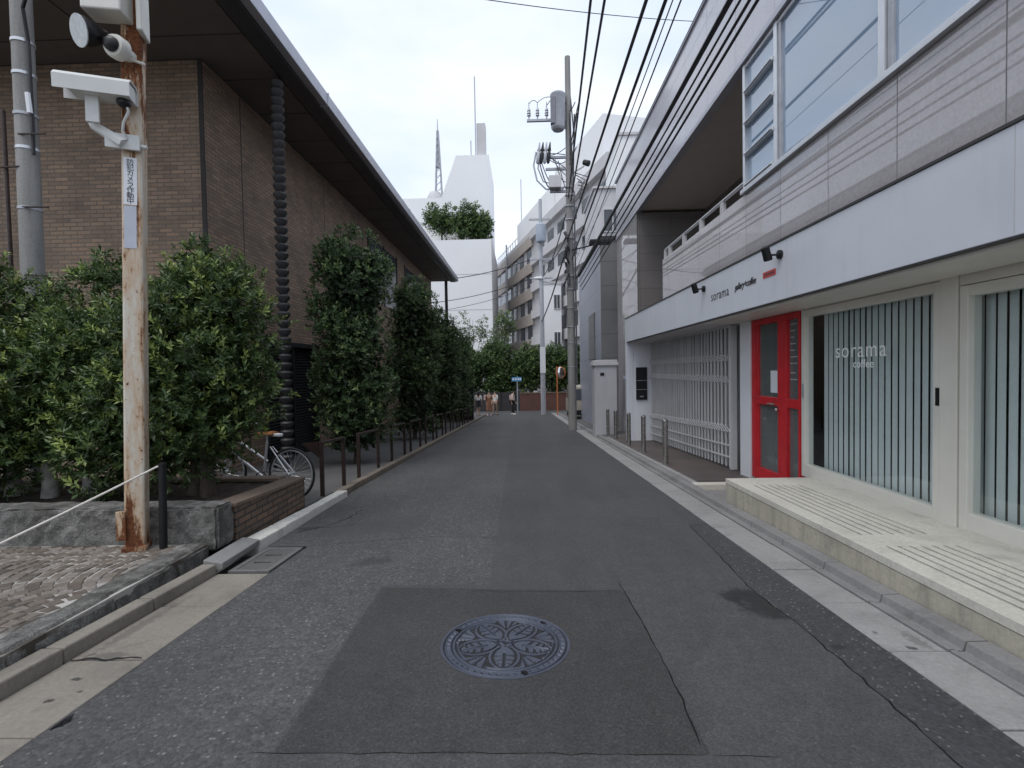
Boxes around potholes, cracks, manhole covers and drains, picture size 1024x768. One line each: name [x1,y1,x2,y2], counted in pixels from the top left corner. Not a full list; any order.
manhole cover [440,614,570,680]
crack [297,510,418,546]
